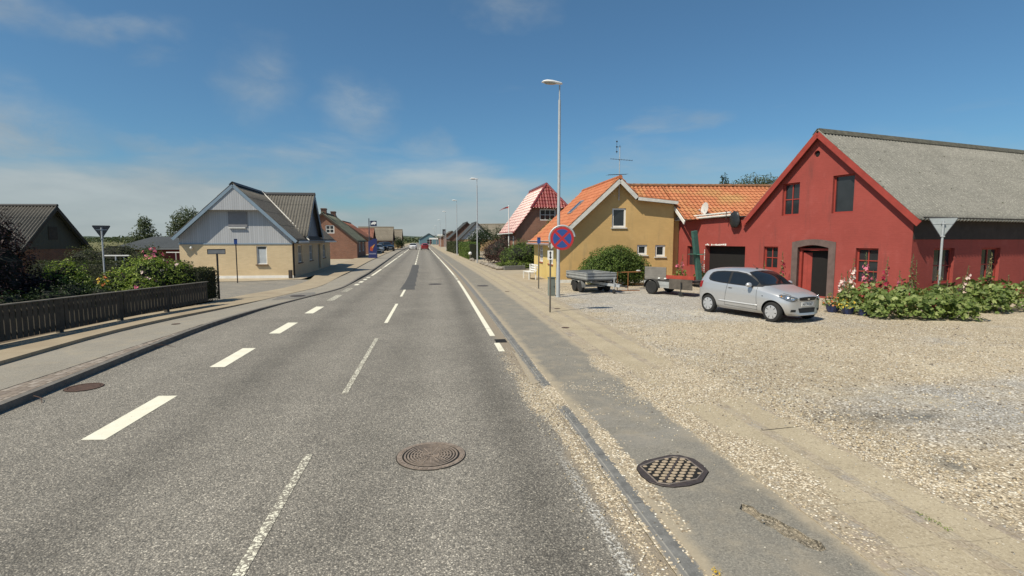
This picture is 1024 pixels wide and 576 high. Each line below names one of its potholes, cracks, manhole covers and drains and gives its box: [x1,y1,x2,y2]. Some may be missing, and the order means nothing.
pothole [740,504,826,552]
manhole cover [63,383,105,392]
manhole cover [396,442,466,471]
manhole cover [636,455,709,488]
